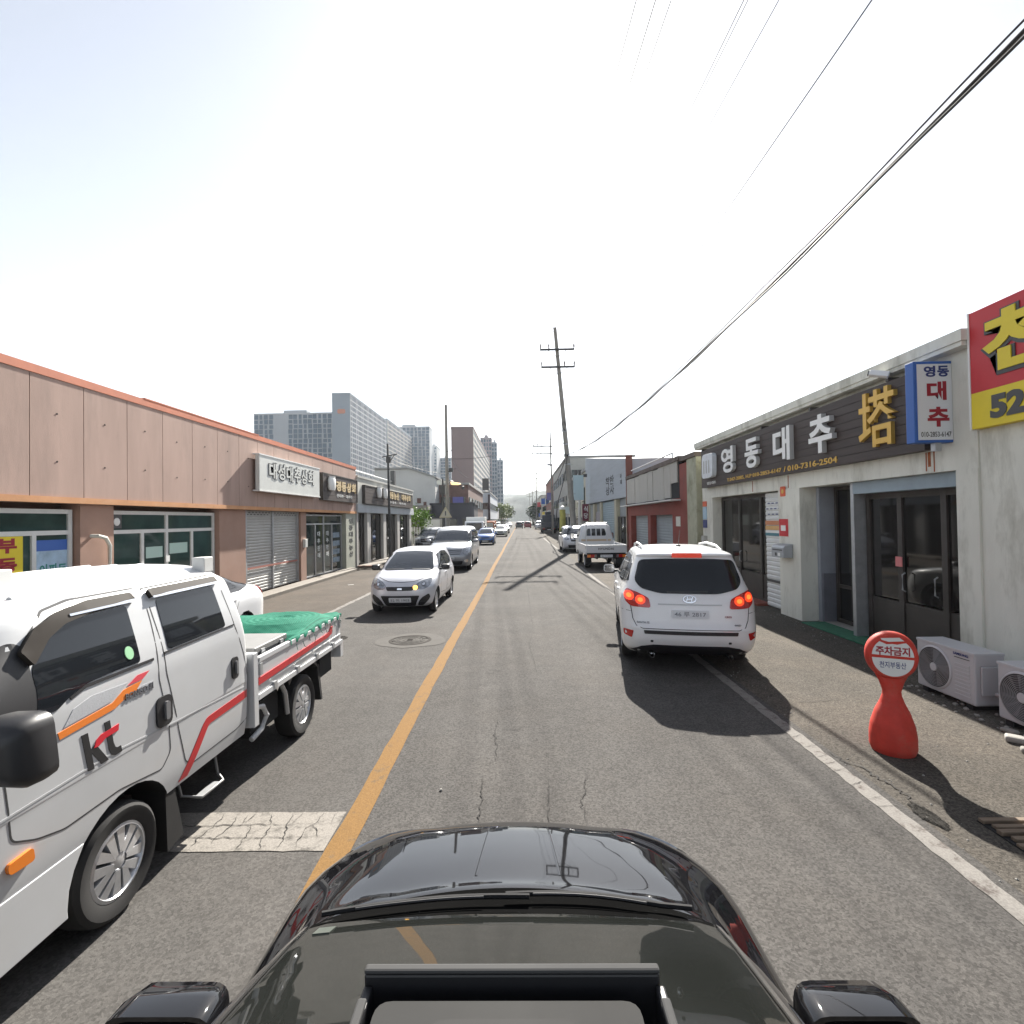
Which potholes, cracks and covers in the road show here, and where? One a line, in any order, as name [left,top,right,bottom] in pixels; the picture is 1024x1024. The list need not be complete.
crack [781,725,919,806]
manhole cover [375,633,445,648]
crack [477,717,521,823]
drain grate [977,817,1024,852]
